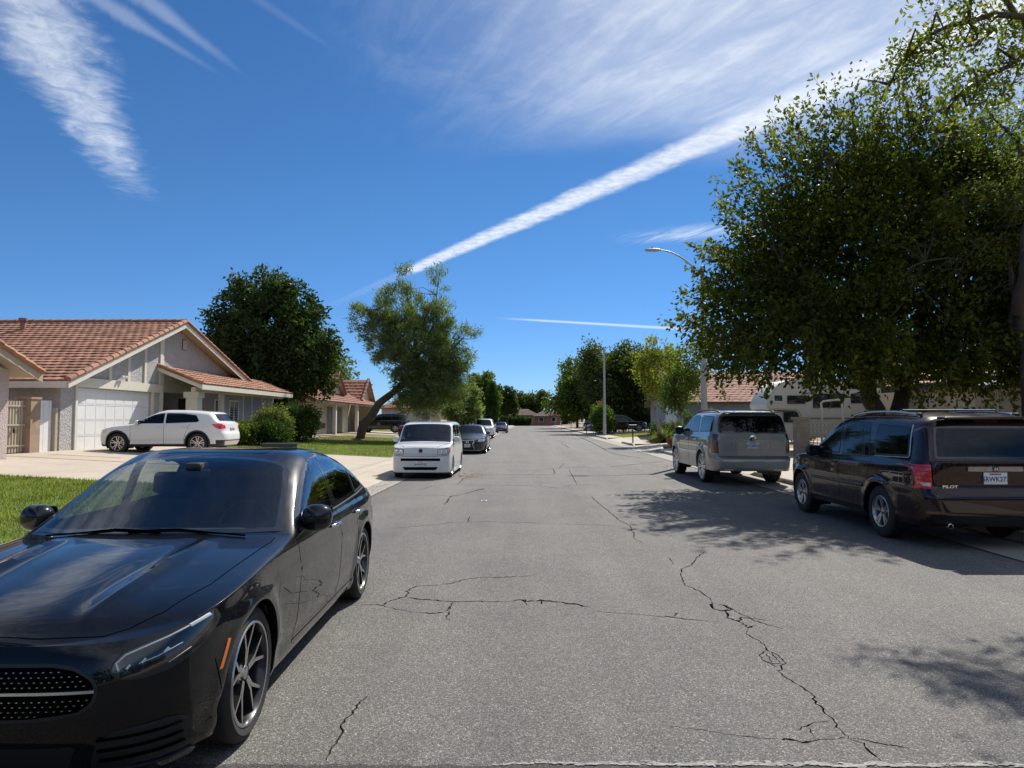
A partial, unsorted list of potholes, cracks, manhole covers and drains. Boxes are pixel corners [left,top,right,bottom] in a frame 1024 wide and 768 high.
crack [354,575,701,621]
crack [326,695,368,760]
crack [403,465,641,542]
crack [668,552,909,761]
